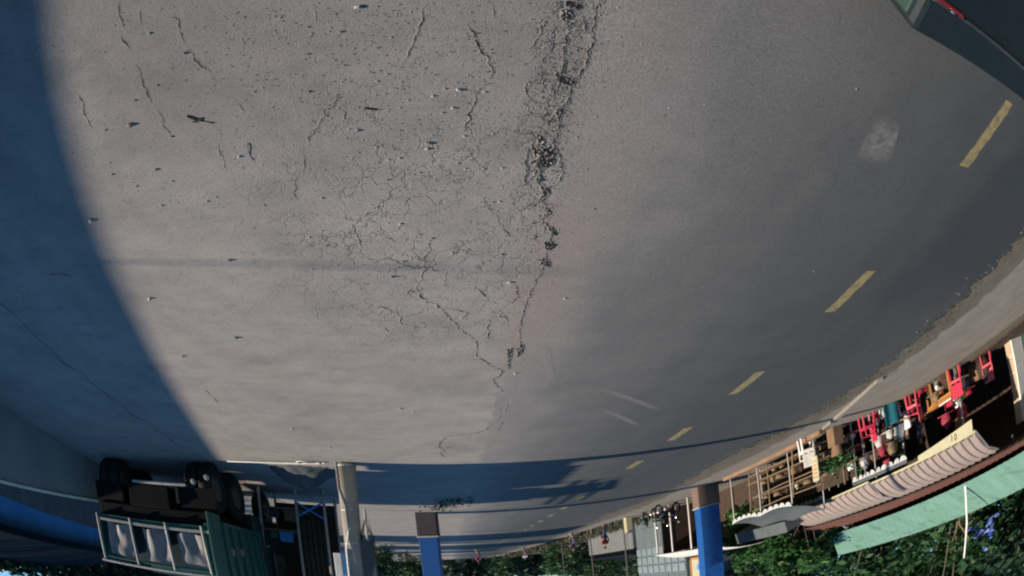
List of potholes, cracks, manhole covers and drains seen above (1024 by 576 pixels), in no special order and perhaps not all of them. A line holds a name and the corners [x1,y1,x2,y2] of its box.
crack [216,144,228,171]
crack [117,2,171,136]
pothole [564,0,585,10]
pothole [535,133,547,153]
crack [343,200,526,457]
crack [168,16,211,74]
crack [463,1,601,242]
crack [78,95,94,129]
pothole [529,145,558,168]
pothole [559,7,575,22]
